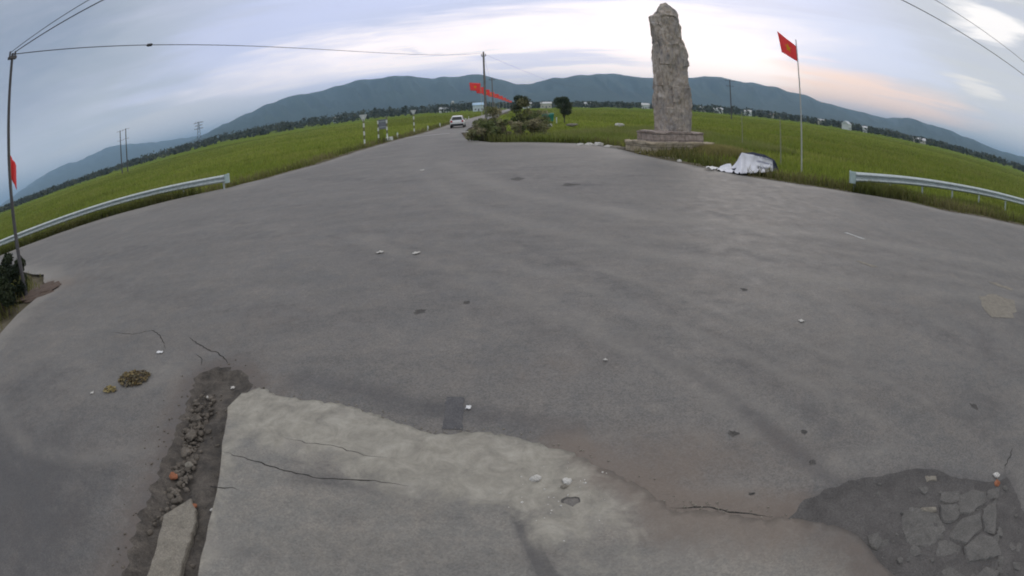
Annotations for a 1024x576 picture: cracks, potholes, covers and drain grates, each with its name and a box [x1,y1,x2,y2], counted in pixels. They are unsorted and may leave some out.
crack [189,337,228,364]
crack [211,438,406,490]
pothole [788,468,1024,576]
